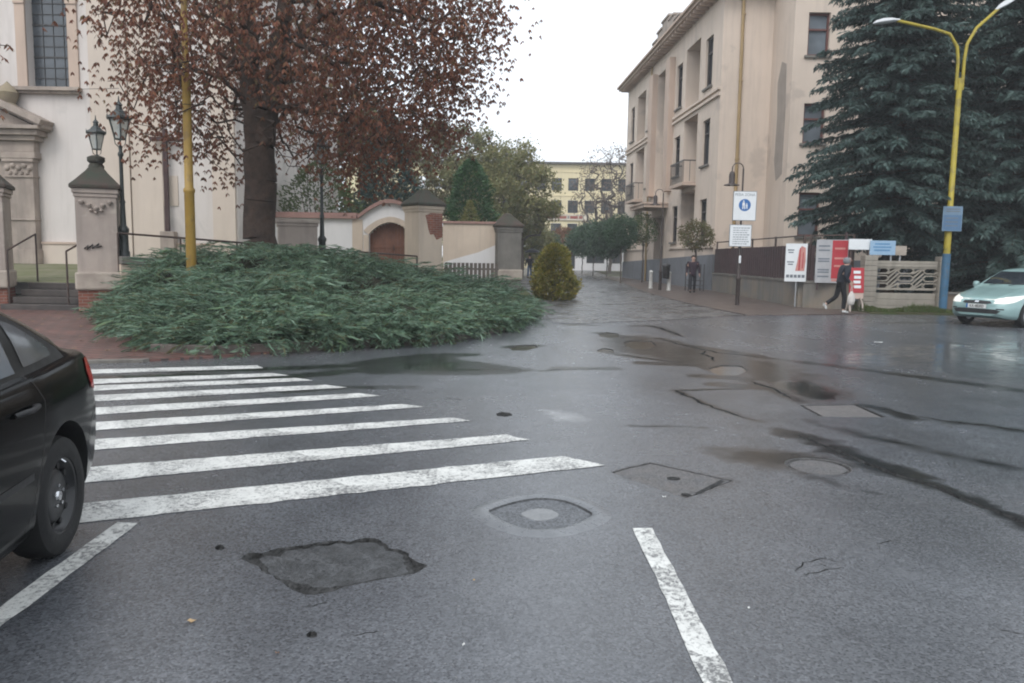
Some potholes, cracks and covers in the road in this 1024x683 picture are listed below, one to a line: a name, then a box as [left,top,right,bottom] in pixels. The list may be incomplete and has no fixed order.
manhole cover [785,458,852,475]
manhole cover [469,493,612,538]
crack [624,325,791,428]
crack [795,558,840,575]
pothole [241,538,427,595]
manhole cover [799,405,885,417]
